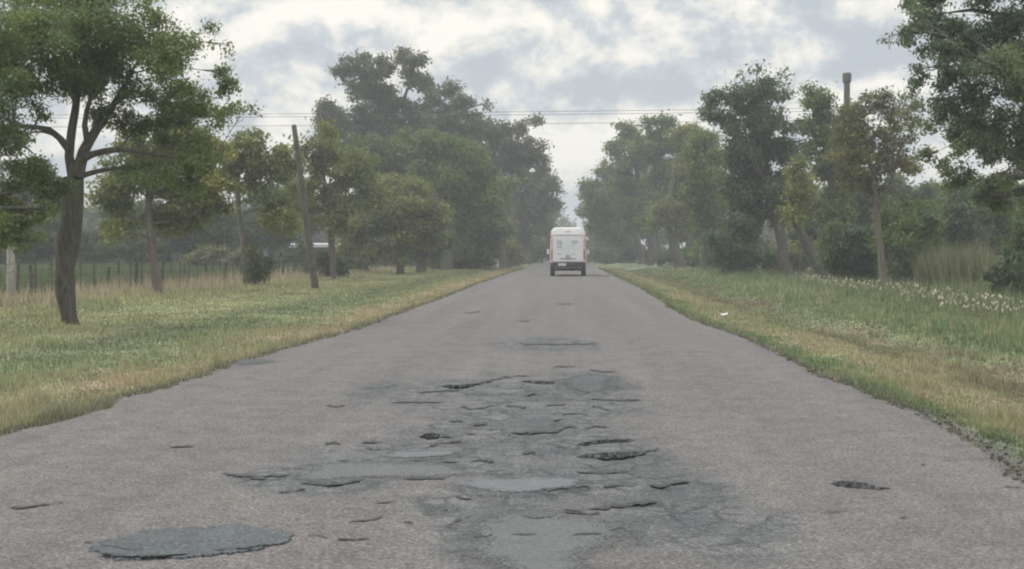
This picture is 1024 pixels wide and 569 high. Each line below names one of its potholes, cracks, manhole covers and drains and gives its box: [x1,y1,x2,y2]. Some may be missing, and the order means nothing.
crack [392,375,640,537]
pothole [830,480,890,490]
pothole [576,451,646,461]
crack [325,440,384,461]
crack [516,469,689,535]
